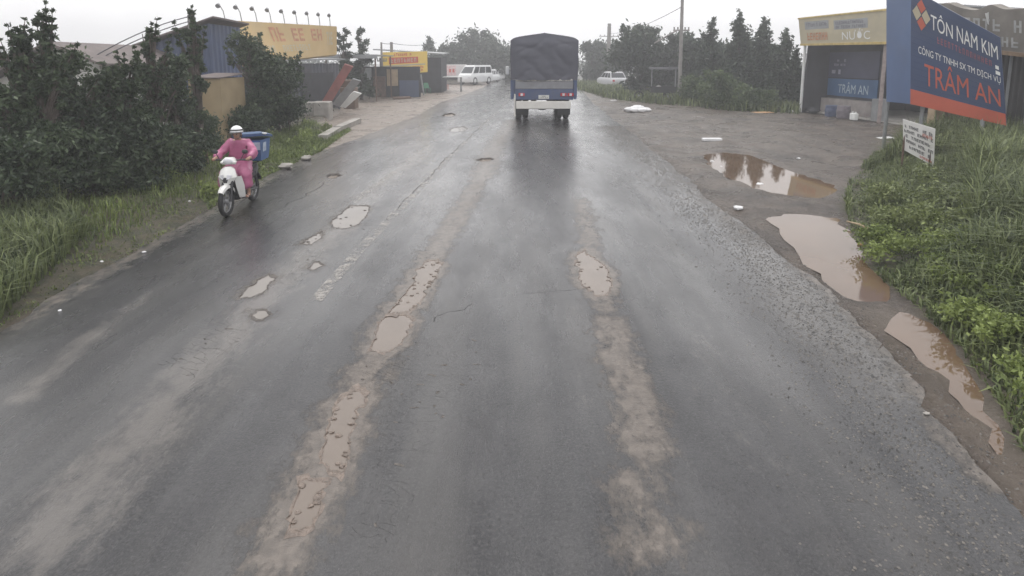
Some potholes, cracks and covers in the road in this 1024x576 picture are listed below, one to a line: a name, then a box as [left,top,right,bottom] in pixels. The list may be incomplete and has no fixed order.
pothole [318,383,370,482]
pothole [573,248,613,297]
pothole [298,230,326,245]
pothole [366,312,416,355]
pothole [284,473,332,539]
pothole [250,309,273,322]
pothole [236,272,278,300]
pothole [329,205,371,229]
pothole [386,258,445,317]
